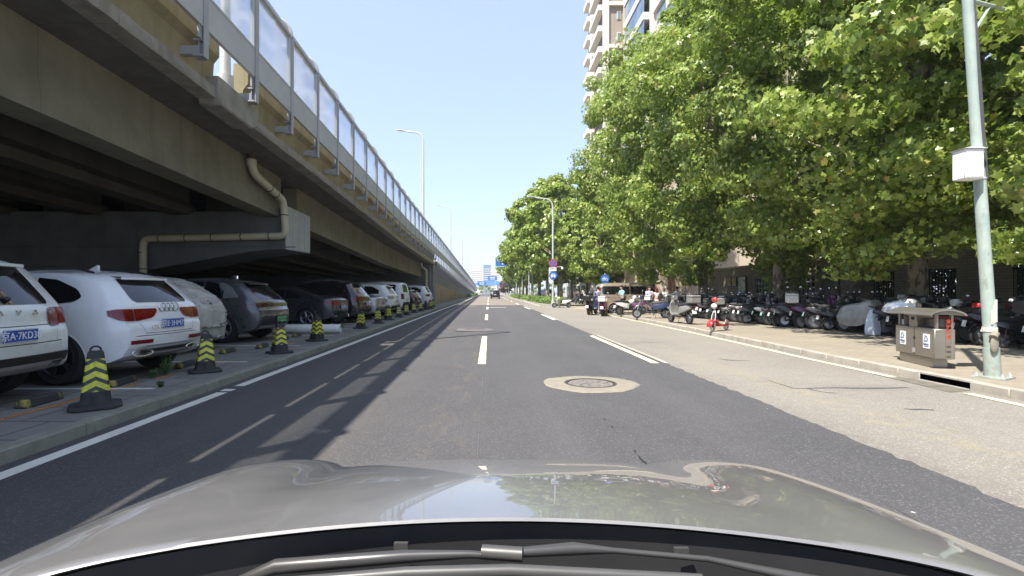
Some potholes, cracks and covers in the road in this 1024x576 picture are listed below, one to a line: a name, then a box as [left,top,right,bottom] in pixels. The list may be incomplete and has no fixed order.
manhole cover [544,376,640,393]
